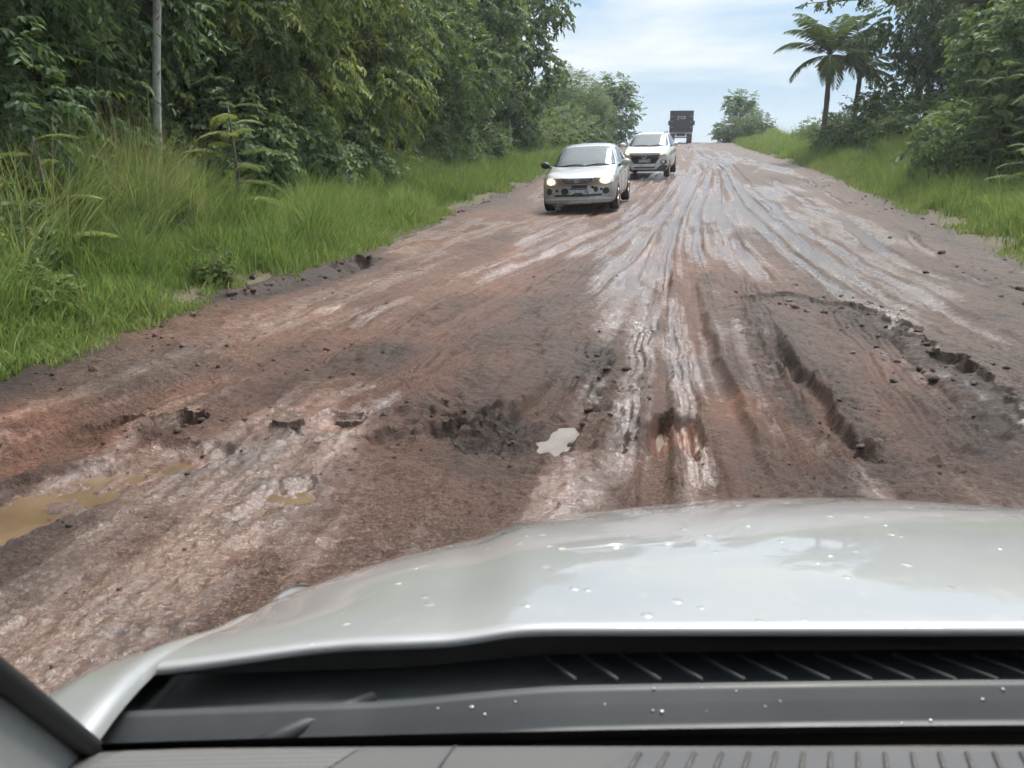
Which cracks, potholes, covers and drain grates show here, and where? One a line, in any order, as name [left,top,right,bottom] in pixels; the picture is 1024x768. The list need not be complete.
pothole [150,409,210,429]
pothole [646,407,708,462]
pothole [365,319,662,458]
pothole [0,432,241,549]
pothole [733,290,1024,493]
pothole [292,410,369,436]
